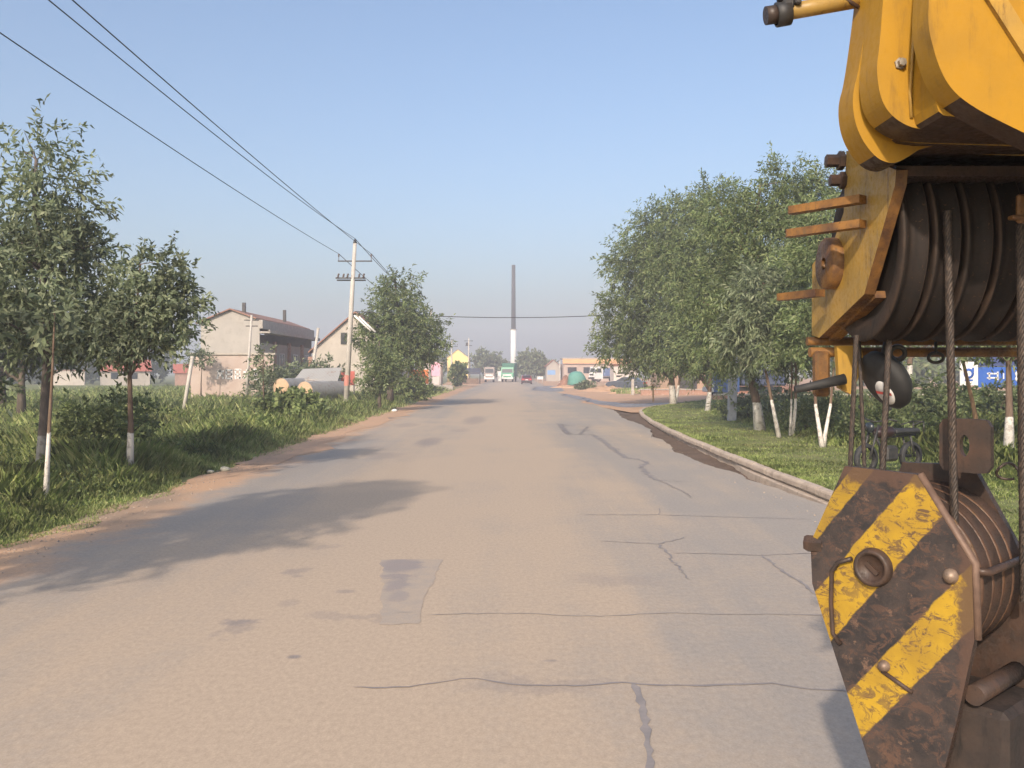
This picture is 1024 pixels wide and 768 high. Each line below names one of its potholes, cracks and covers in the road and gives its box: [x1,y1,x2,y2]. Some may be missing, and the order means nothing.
crack [611,537,815,594]
crack [559,423,695,497]
crack [362,678,846,768]
